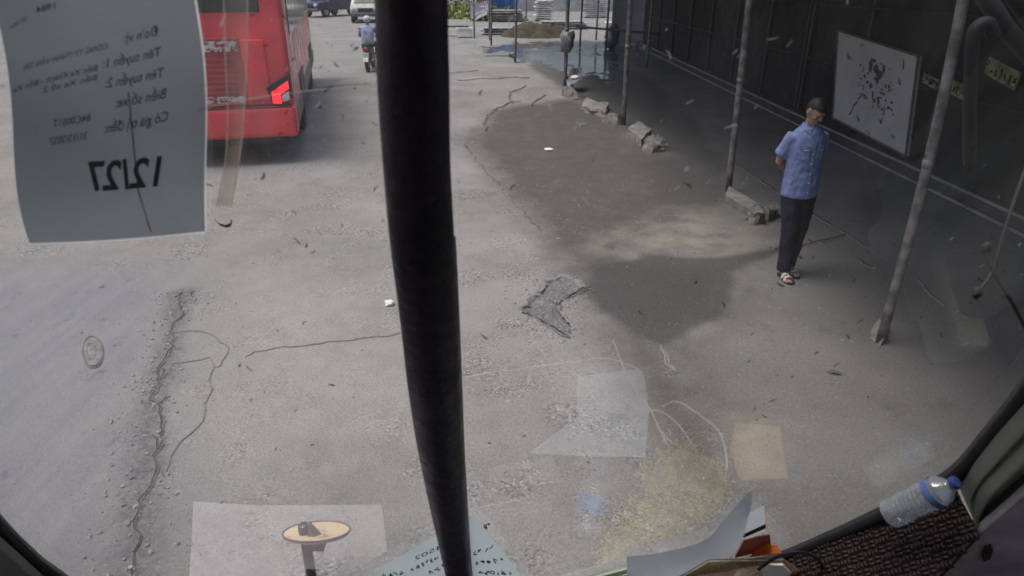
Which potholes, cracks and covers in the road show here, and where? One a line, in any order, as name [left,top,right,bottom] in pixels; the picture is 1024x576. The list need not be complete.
crack [483,85,546,131]
manhole cover [82,336,104,369]
crack [130,292,398,576]
pothole [515,273,585,339]
crack [916,278,946,307]
